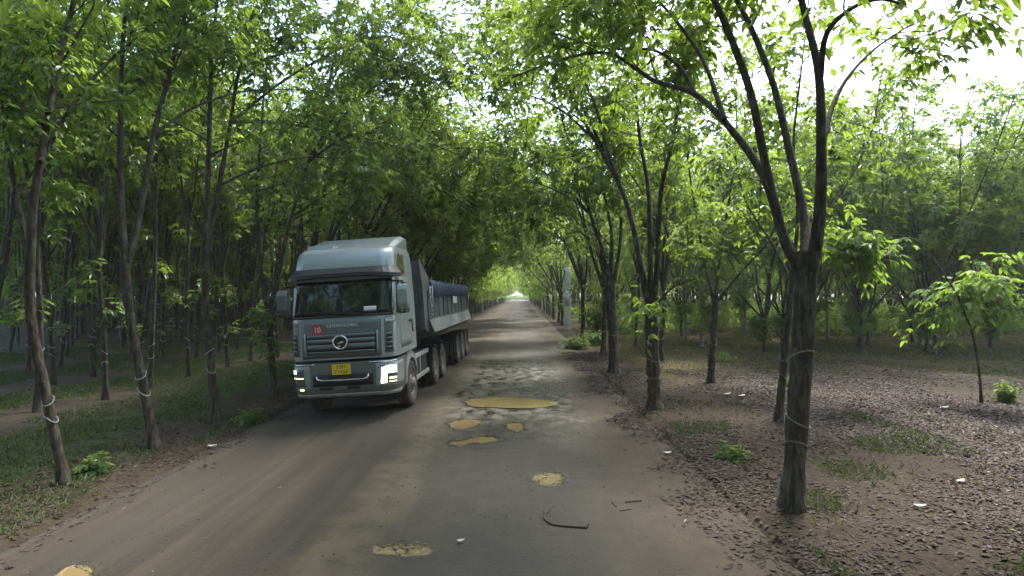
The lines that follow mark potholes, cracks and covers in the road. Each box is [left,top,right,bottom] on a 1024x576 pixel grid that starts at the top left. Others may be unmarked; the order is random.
pothole [444,434,504,447]
pothole [526,469,572,489]
pothole [362,540,444,562]
pothole [462,396,562,410]
pothole [444,418,485,430]
pothole [47,560,108,576]
pothole [503,421,528,433]
